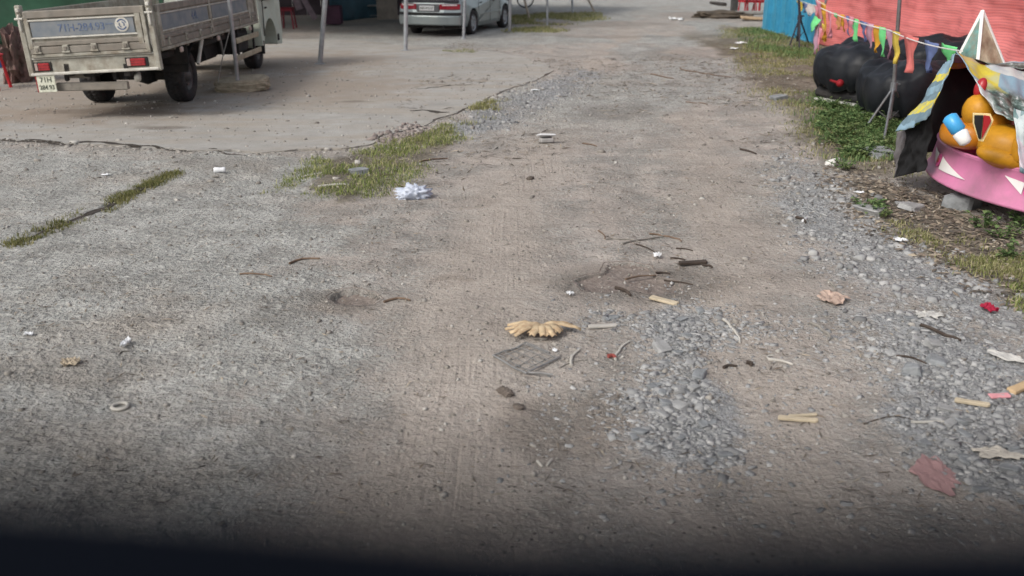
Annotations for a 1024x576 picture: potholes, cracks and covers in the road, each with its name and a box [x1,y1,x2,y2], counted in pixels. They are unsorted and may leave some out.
crack [1,138,247,156]
pothole [325,287,384,307]
pothole [571,260,684,296]
